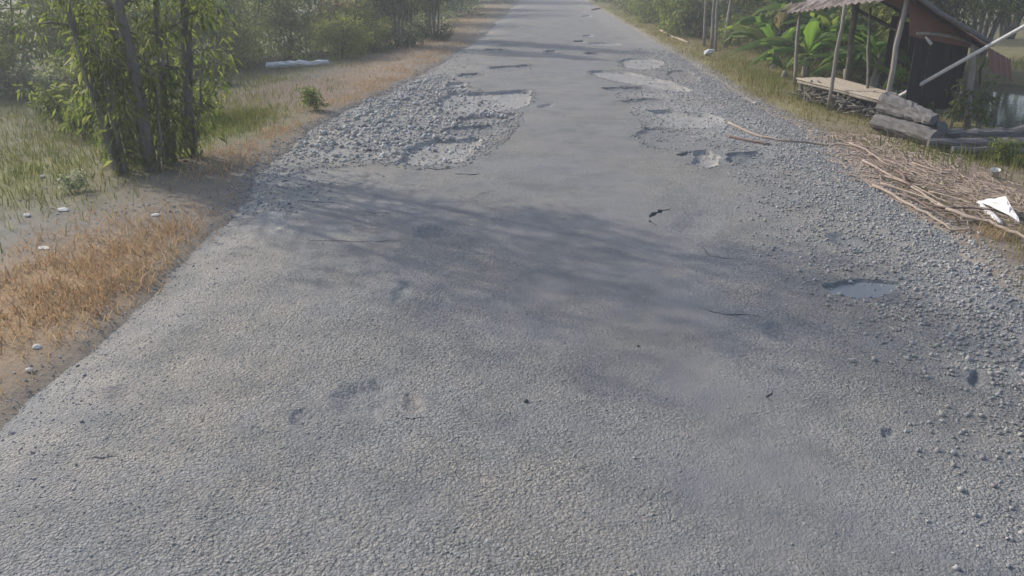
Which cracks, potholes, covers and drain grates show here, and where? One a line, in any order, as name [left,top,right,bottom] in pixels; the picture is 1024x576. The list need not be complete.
pothole [619,58,664,70]
pothole [635,127,694,148]
pothole [821,278,904,298]
pothole [397,137,482,166]
pothole [435,90,533,113]
pothole [455,113,519,123]
pothole [691,150,721,167]
pothole [647,110,725,129]
